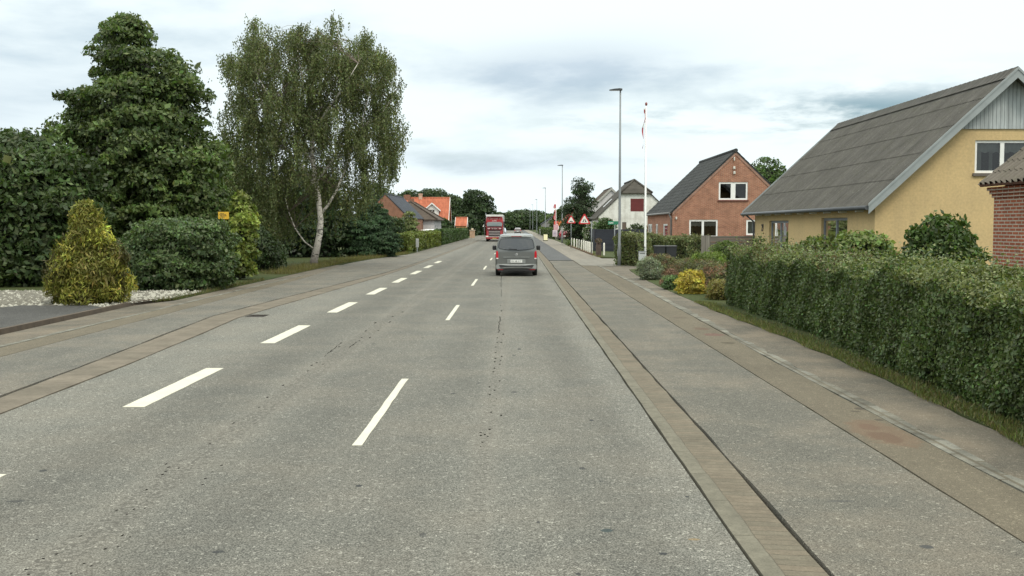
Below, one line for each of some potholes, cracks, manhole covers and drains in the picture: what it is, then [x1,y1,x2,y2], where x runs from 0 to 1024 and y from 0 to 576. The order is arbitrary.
crack [479,276,504,447]
